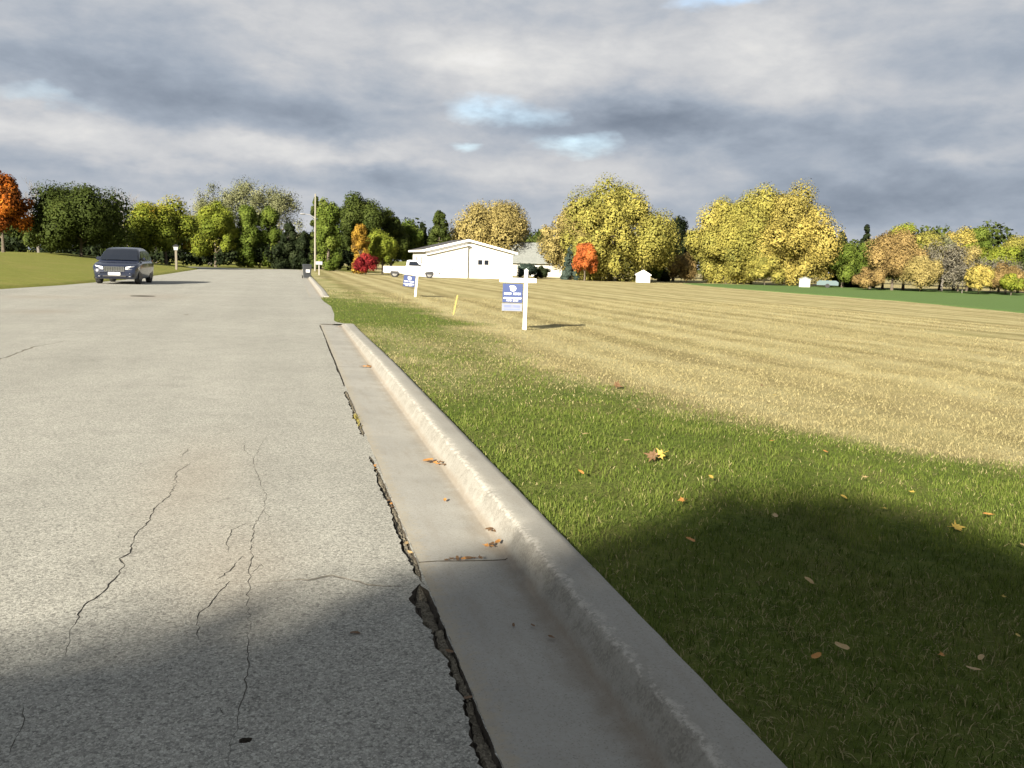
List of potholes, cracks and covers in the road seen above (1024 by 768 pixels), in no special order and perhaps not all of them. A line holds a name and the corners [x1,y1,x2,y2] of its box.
crack [196,436,422,768]
crack [320,324,365,436]
crack [65,447,191,658]
crack [431,629,473,704]
